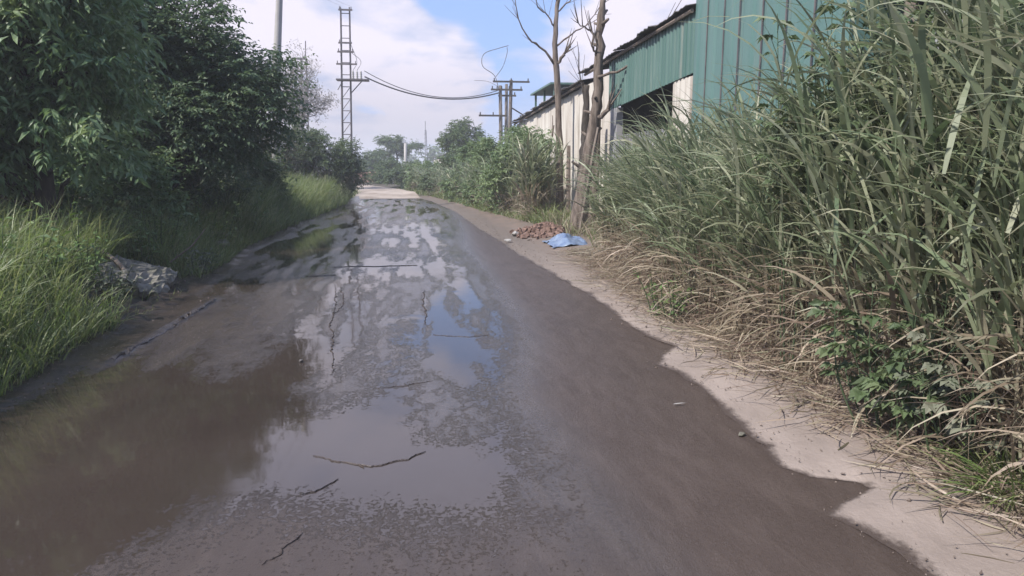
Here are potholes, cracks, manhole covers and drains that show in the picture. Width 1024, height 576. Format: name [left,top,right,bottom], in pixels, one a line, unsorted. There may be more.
crack [317,265,411,372]
crack [422,292,485,337]
crack [109,299,214,361]
crack [298,451,426,496]
